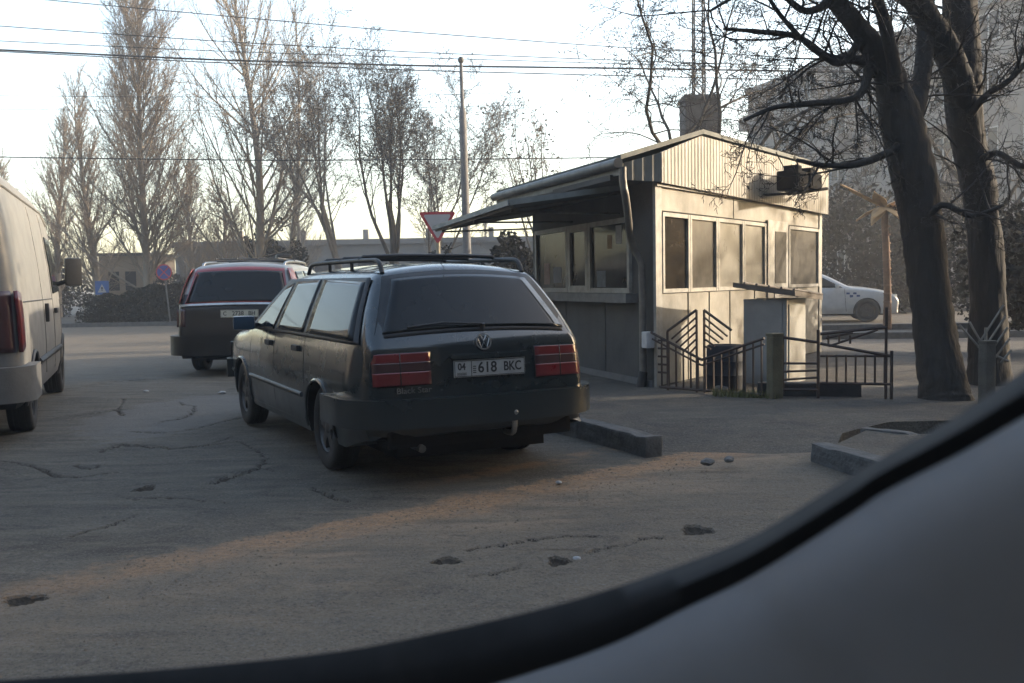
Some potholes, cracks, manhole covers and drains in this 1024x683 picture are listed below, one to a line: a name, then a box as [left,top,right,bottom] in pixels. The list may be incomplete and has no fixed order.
pothole [406,551,486,574]
crack [0,378,401,545]
